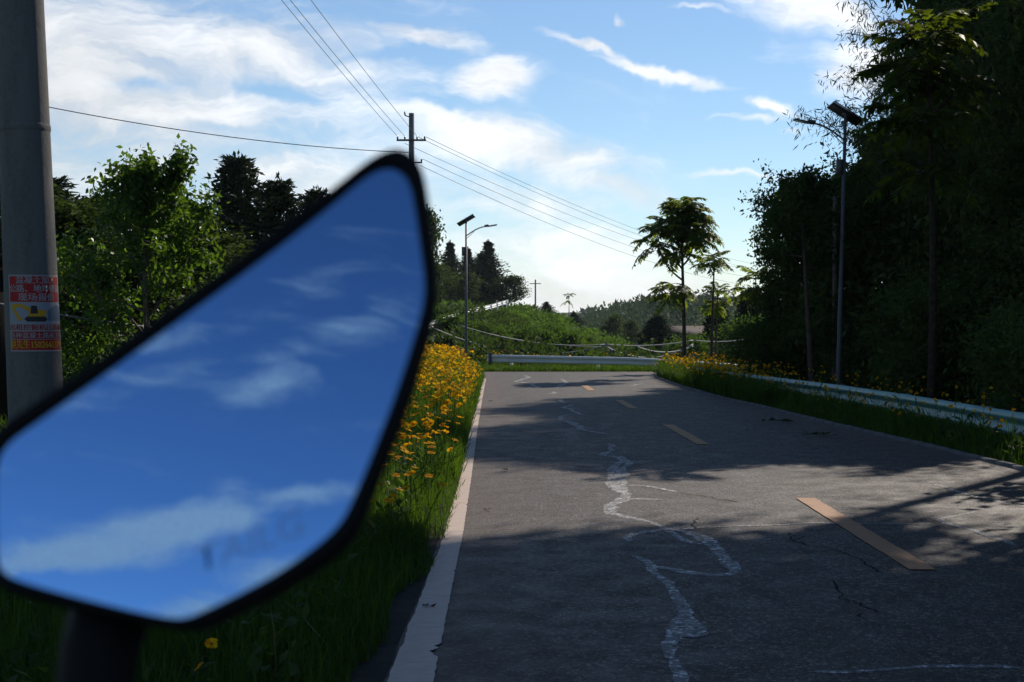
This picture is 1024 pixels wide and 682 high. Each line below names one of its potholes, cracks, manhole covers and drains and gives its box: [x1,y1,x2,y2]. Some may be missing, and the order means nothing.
crack [788,532,882,573]
crack [832,580,878,618]
